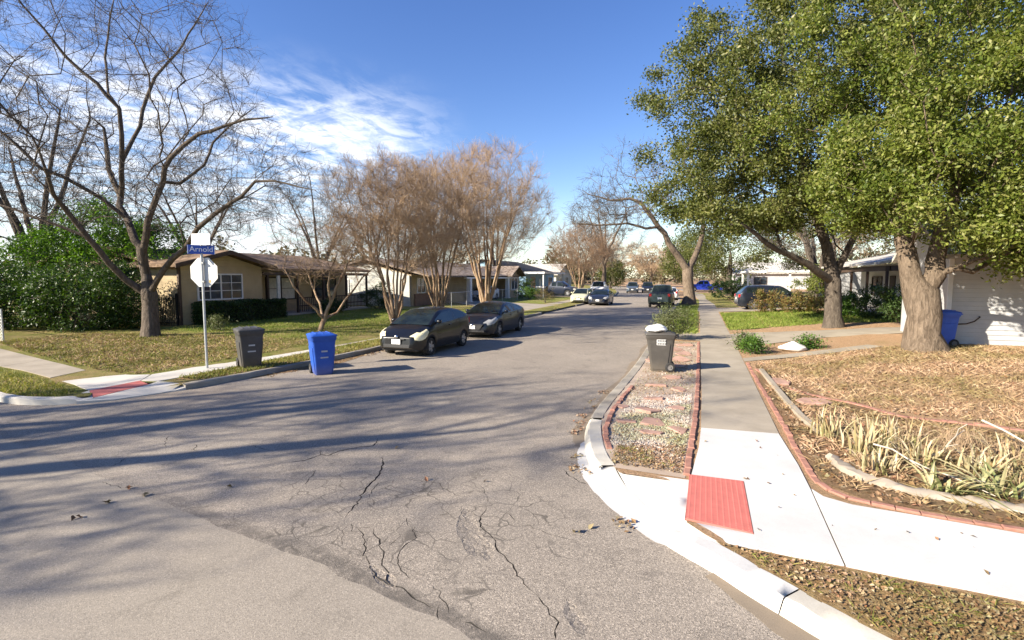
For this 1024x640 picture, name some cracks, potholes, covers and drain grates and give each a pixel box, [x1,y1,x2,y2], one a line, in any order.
crack [253,438,449,620]
crack [407,478,571,639]
